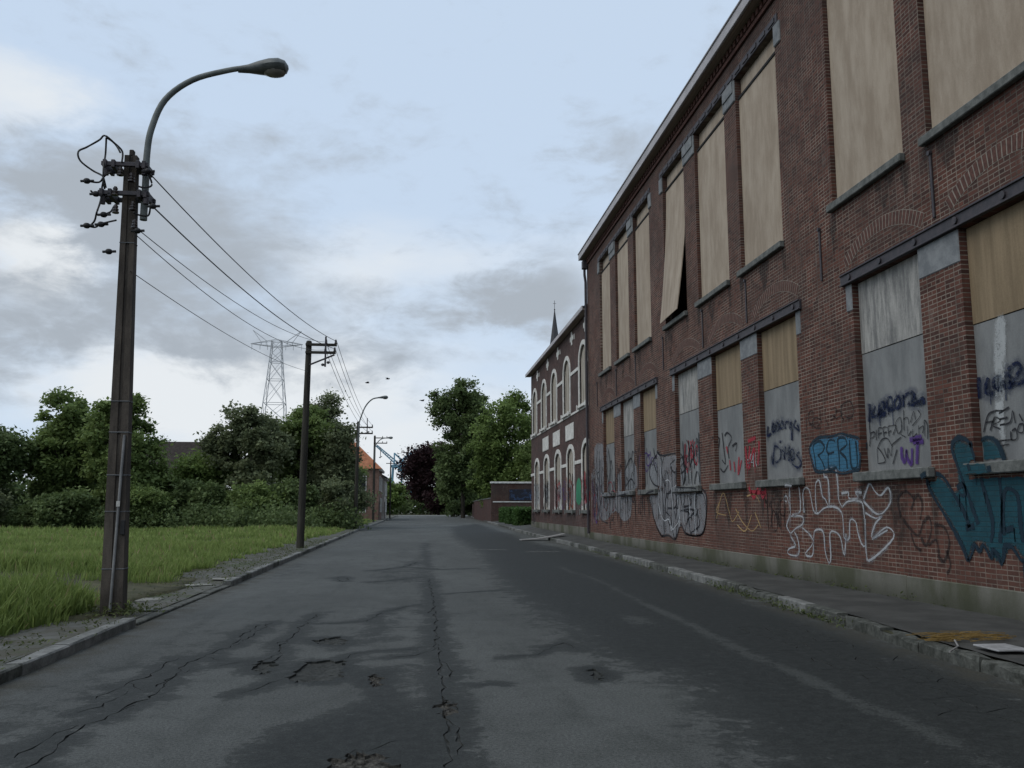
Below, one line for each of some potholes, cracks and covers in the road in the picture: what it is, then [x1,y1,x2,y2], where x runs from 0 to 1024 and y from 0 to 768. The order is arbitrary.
pothole [327,752,401,768]
pothole [368,674,386,687]
crack [14,623,272,768]
pothole [432,700,459,719]
pothole [285,660,347,683]
pothole [251,660,279,675]
crack [265,606,407,662]
